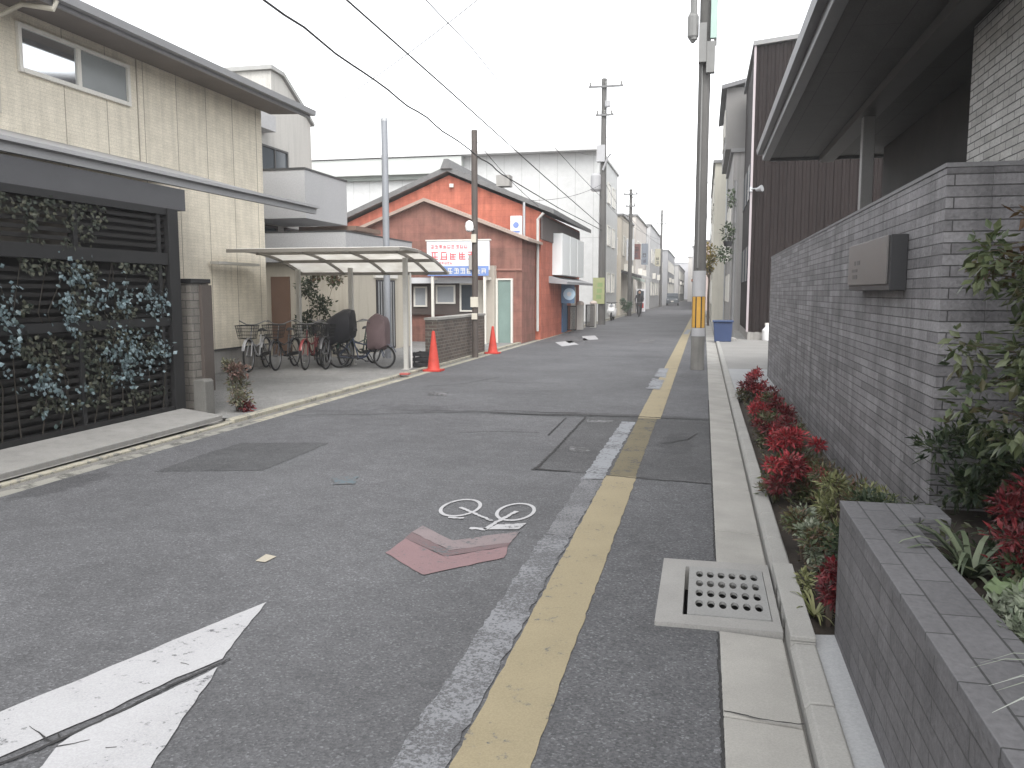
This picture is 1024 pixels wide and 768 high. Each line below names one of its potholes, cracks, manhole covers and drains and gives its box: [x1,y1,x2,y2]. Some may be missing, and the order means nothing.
crack [0,658,231,764]
drain grate [654,558,816,660]
crack [330,410,701,471]
crack [724,710,804,725]
